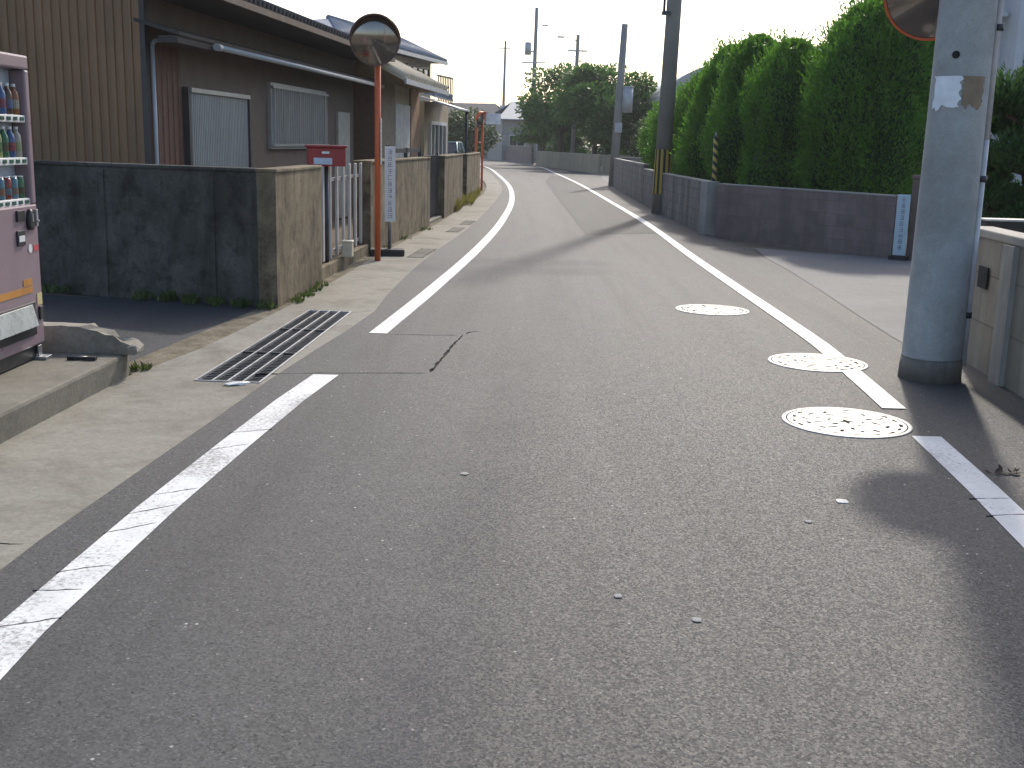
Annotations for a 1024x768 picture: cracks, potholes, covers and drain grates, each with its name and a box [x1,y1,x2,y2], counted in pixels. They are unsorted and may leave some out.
drain grate [406,248,438,258]
crack [0,617,62,627]
manhole cover [781,407,913,439]
manhole cover [767,353,869,373]
crack [33,565,107,591]
manhole cover [675,304,750,316]
drain grate [194,310,352,383]
crack [103,488,196,534]
crack [969,498,1024,517]
crack [255,331,480,376]
